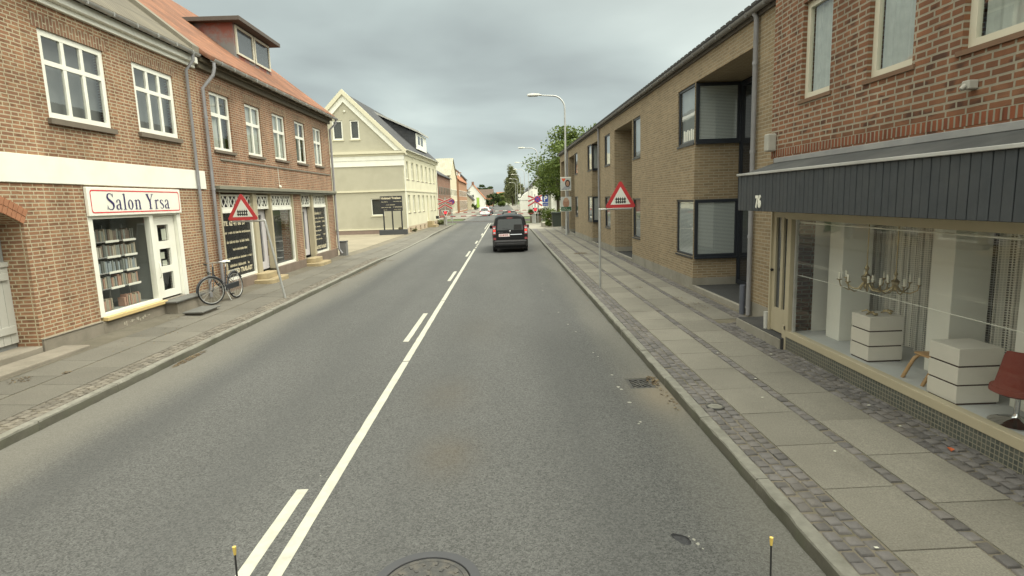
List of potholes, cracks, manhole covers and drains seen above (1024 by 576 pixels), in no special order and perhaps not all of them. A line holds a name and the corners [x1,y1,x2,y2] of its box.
drain grate [625,378,656,389]
manhole cover [377,551,481,576]
pothole [671,533,691,545]
